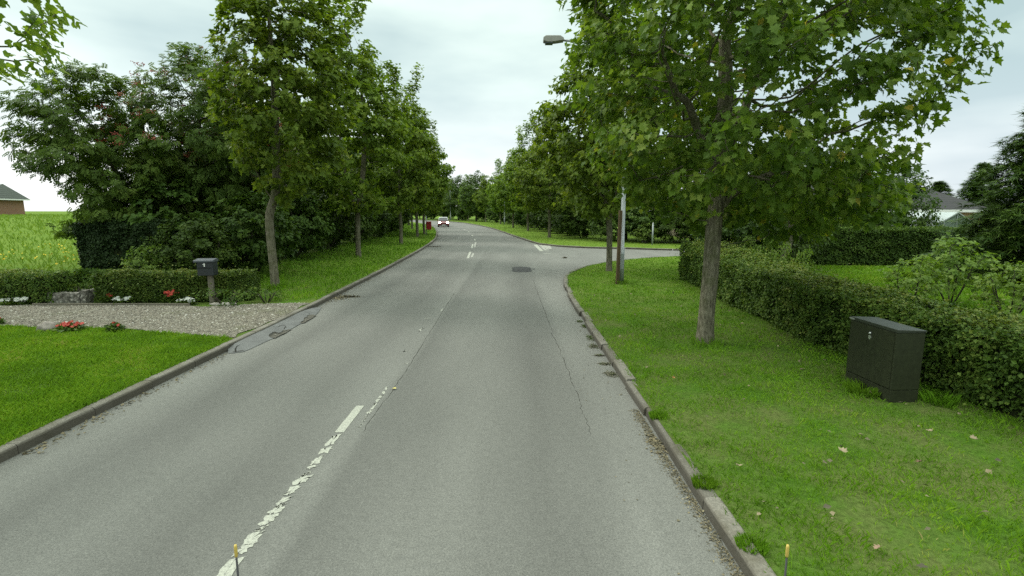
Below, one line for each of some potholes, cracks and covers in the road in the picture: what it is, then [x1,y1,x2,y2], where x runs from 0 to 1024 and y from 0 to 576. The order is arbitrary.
crack [533,280,589,426]
